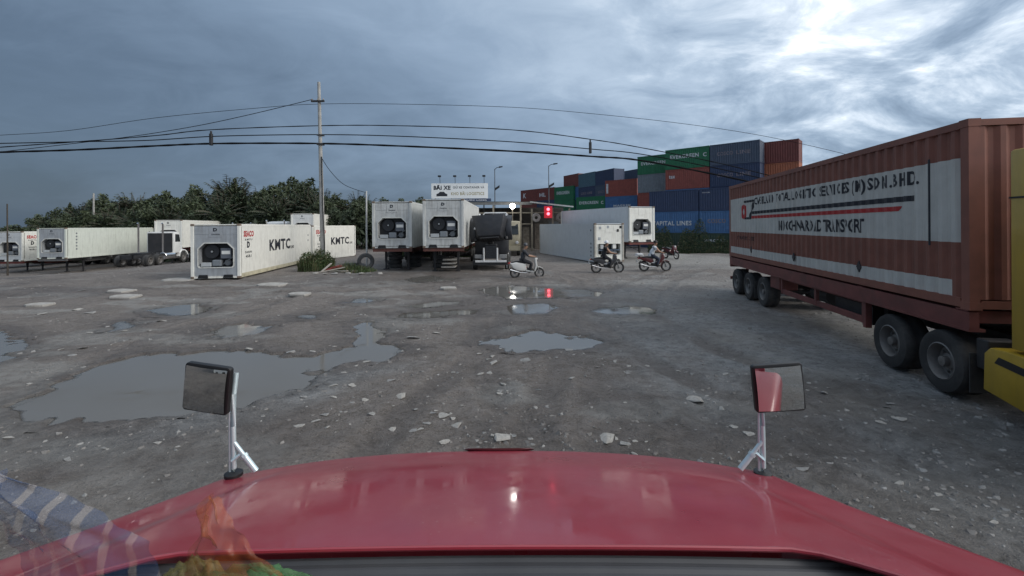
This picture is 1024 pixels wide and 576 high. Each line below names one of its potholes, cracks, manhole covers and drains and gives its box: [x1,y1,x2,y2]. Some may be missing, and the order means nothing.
pothole [578,303,666,318]
pothole [0,318,421,434]
pothole [463,284,615,300]
pothole [132,302,224,318]
pothole [465,326,624,355]
pothole [489,301,568,317]
